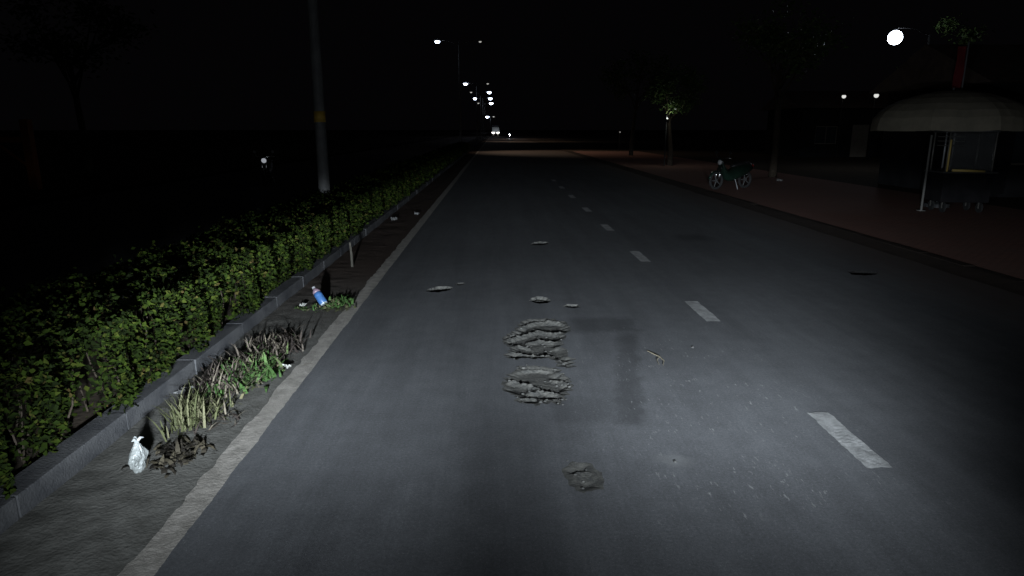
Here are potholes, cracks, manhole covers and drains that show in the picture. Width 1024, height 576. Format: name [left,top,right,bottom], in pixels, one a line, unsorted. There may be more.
pothole [502,318,577,368]
pothole [529,296,552,304]
pothole [501,364,574,406]
pothole [561,460,604,493]
